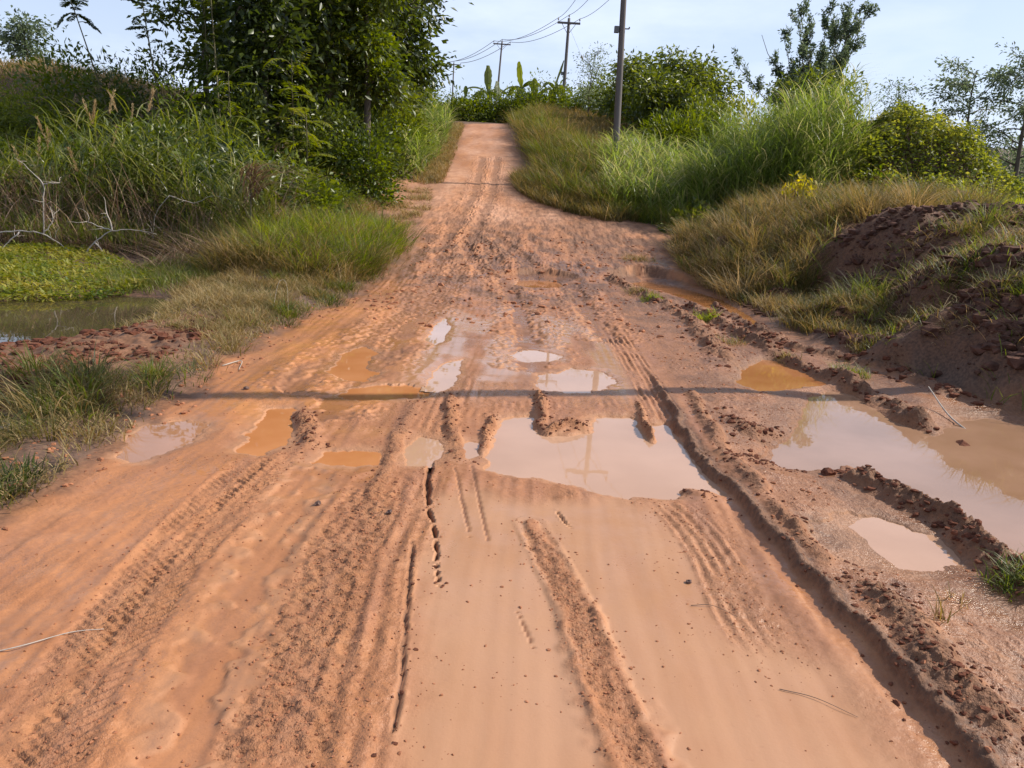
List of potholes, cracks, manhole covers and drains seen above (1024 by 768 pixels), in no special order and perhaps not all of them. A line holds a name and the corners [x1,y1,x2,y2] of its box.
pothole [532,365,620,394]
pothole [423,317,456,345]
pothole [756,388,1024,555]
pothole [232,404,306,457]
pothole [398,433,451,468]
pothole [732,357,832,391]
pothole [481,409,728,501]
pothole [802,508,961,577]
pothole [111,417,214,464]
pothole [420,357,469,393]
pothole [506,349,567,363]
